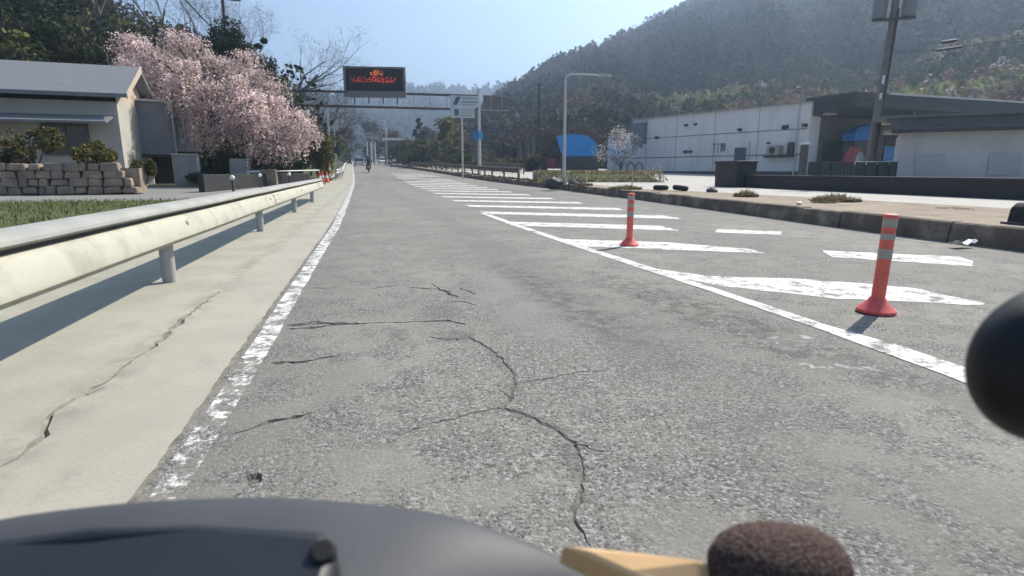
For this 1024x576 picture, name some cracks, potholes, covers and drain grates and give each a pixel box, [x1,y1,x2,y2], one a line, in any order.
crack [0,292,219,467]
pothole [242,472,263,485]
crack [270,354,341,365]
crack [231,412,313,435]
crack [286,283,608,547]
